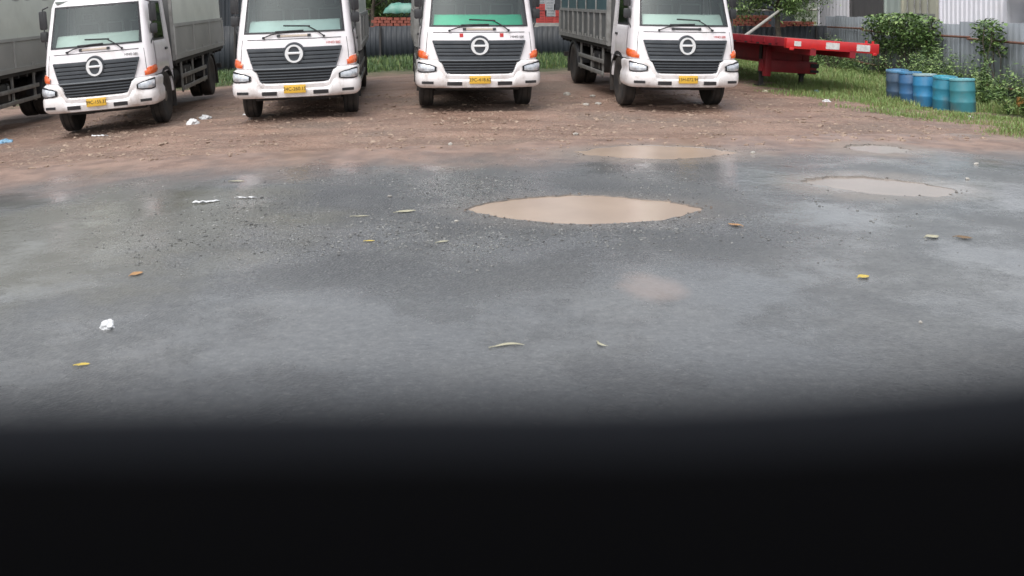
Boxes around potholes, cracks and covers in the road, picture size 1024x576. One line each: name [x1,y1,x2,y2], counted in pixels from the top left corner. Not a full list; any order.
pothole [571,144,740,160]
pothole [456,193,712,226]
pothole [800,176,962,197]
pothole [843,143,911,154]
